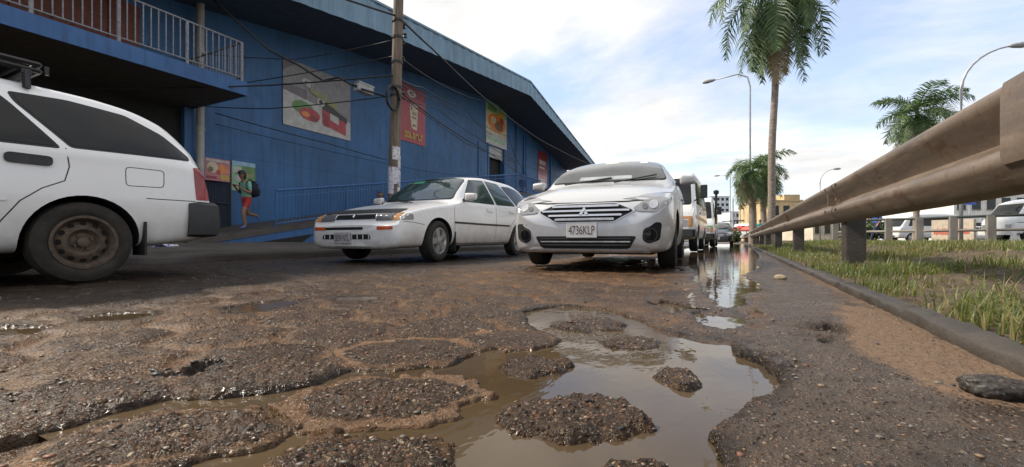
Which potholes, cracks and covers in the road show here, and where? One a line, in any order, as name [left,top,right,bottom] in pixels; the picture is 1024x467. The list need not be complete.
pothole [642,299,689,314]
pothole [811,321,855,334]
pothole [222,299,305,313]
pothole [0,304,786,467]
